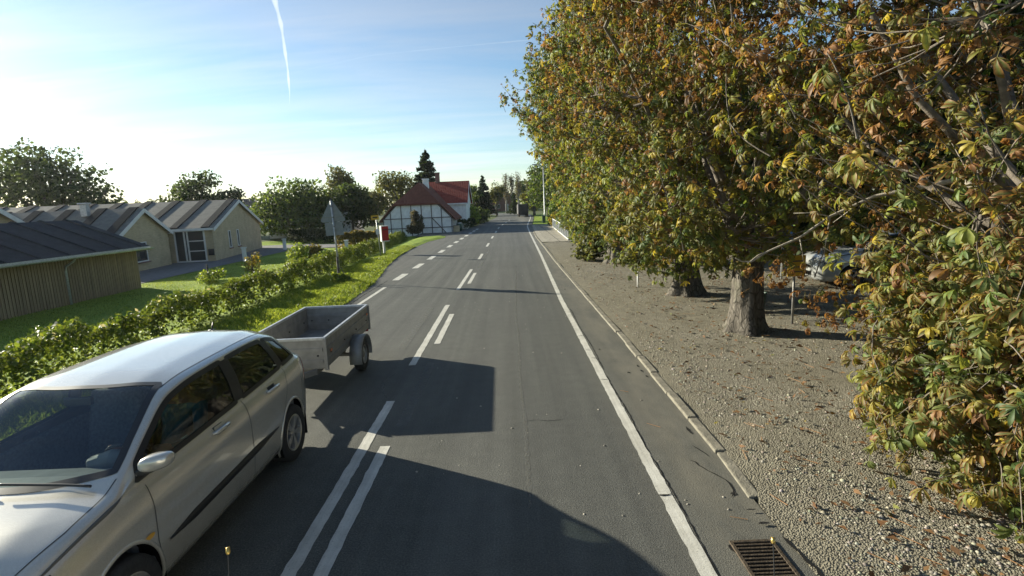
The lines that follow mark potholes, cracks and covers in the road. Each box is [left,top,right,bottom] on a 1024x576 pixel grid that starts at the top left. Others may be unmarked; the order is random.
drain grate [729,539,801,576]
crack [691,445,735,496]
